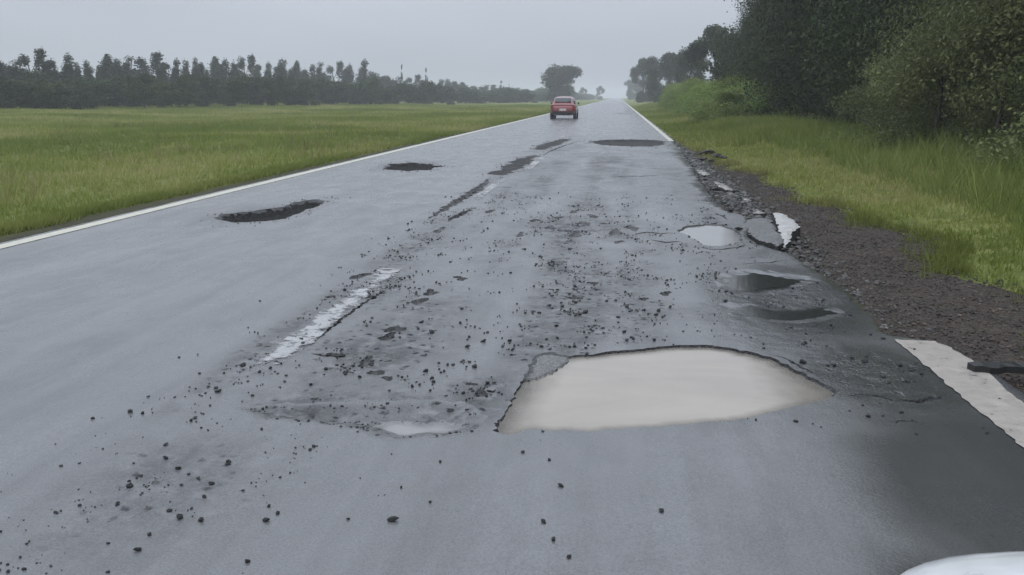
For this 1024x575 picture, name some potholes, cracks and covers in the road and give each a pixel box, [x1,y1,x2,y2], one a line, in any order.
pothole [677,224,743,246]
pothole [533,139,571,150]
pothole [492,345,837,434]
crack [635,232,680,243]
pothole [716,301,845,324]
crack [846,393,952,403]
pothole [715,269,823,294]
pothole [213,199,325,223]
pothole [589,139,665,147]
pothole [487,155,540,175]
pothole [234,398,488,442]
pothole [383,162,445,171]
